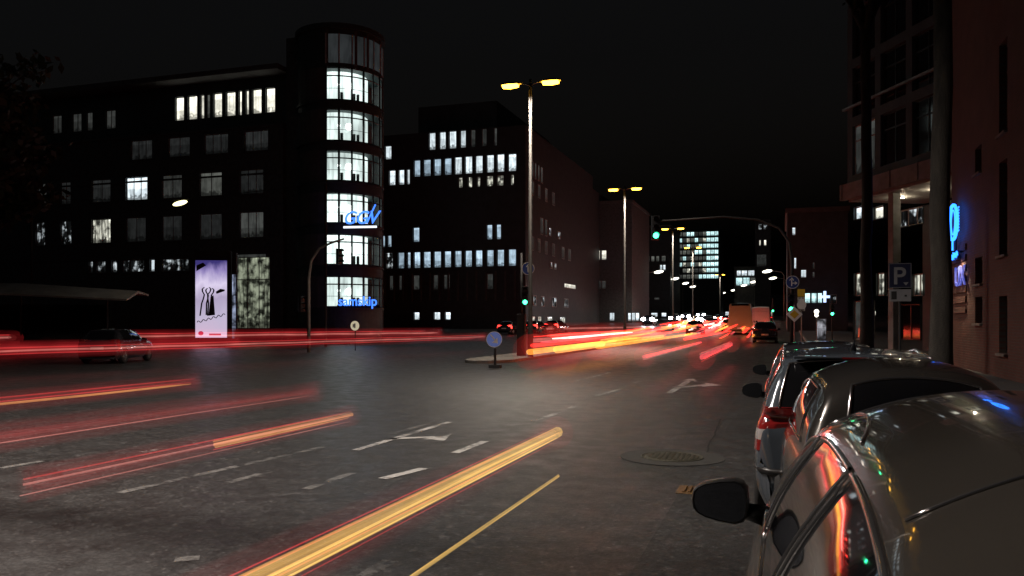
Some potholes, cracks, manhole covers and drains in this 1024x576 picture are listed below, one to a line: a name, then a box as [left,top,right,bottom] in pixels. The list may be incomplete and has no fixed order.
crack [688,419,721,452]
manhole cover [620,449,725,466]
